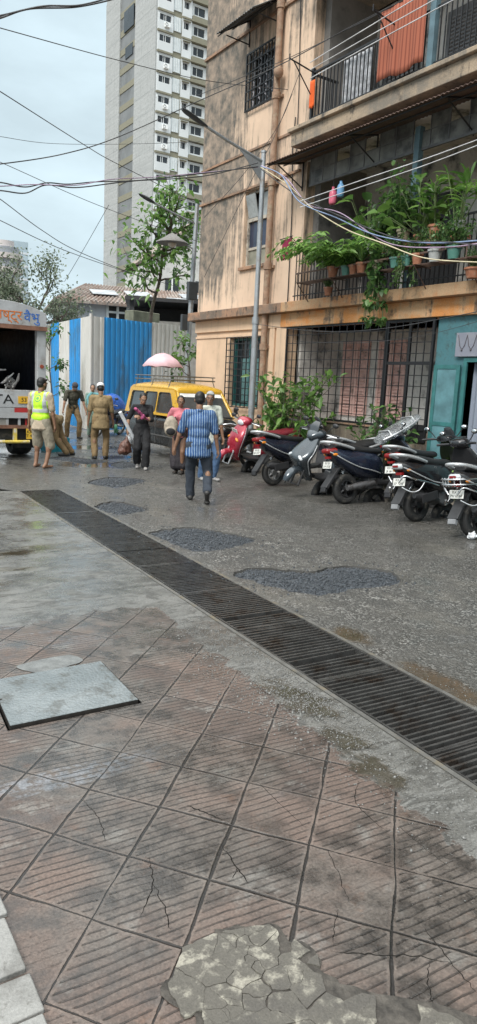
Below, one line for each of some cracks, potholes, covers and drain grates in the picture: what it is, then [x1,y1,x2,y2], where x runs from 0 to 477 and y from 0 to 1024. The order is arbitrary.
crack [140,851,477,1024]
drain grate [17,489,477,792]
manhole cover [0,661,142,731]
